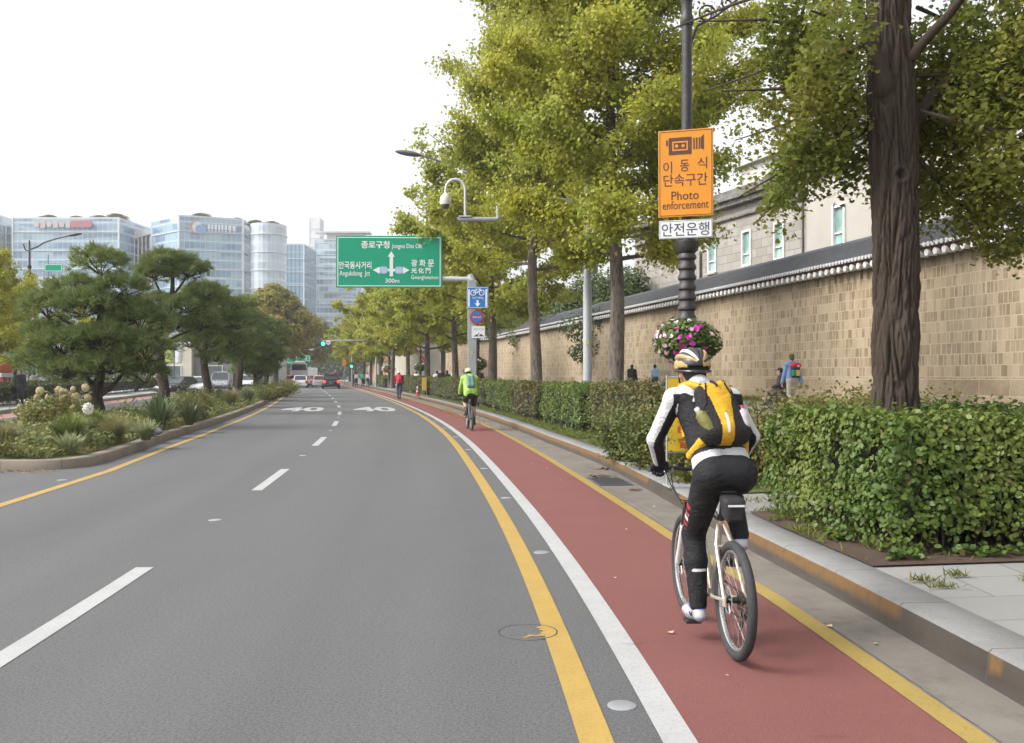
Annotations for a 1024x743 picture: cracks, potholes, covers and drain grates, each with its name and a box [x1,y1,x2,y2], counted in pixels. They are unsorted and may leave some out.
drain grate [588,477,634,486]
manhole cover [498,624,558,641]
